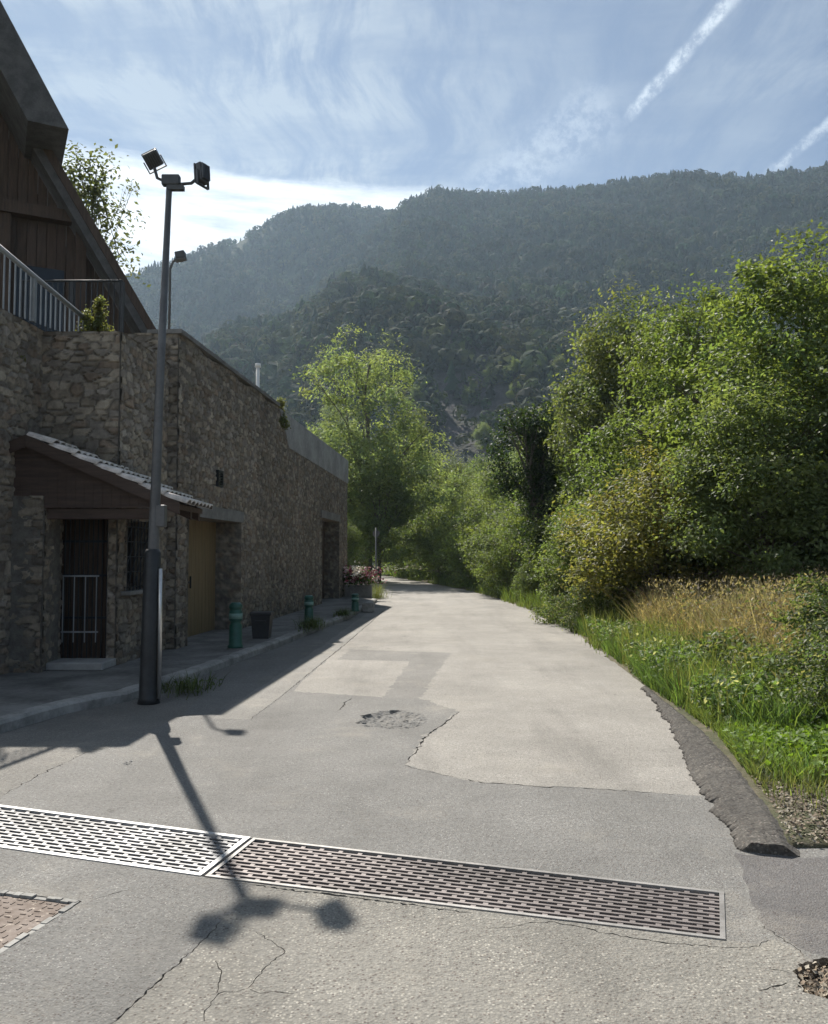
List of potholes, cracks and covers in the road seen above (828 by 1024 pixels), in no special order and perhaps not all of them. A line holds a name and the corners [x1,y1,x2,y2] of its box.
crack [111,922,294,1024]
pothole [356,710,430,730]
crack [405,713,457,764]
crack [488,921,804,955]
drain grate [0,805,251,877]
drain grate [205,838,726,941]
pothole [793,957,828,998]
